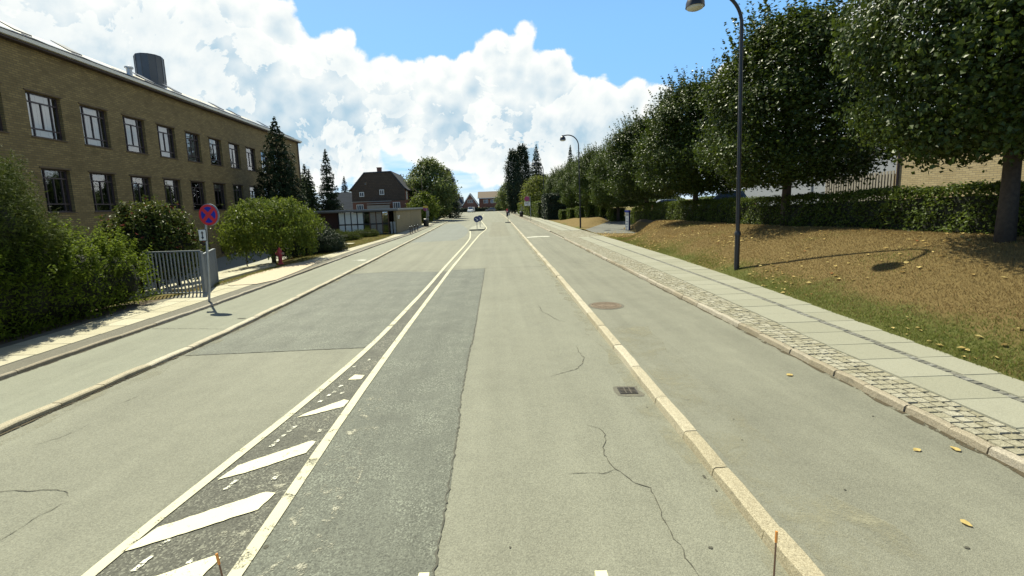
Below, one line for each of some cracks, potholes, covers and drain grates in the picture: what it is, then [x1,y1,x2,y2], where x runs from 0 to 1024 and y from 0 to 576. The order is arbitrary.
crack [0,489,68,540]
crack [570,425,699,576]
